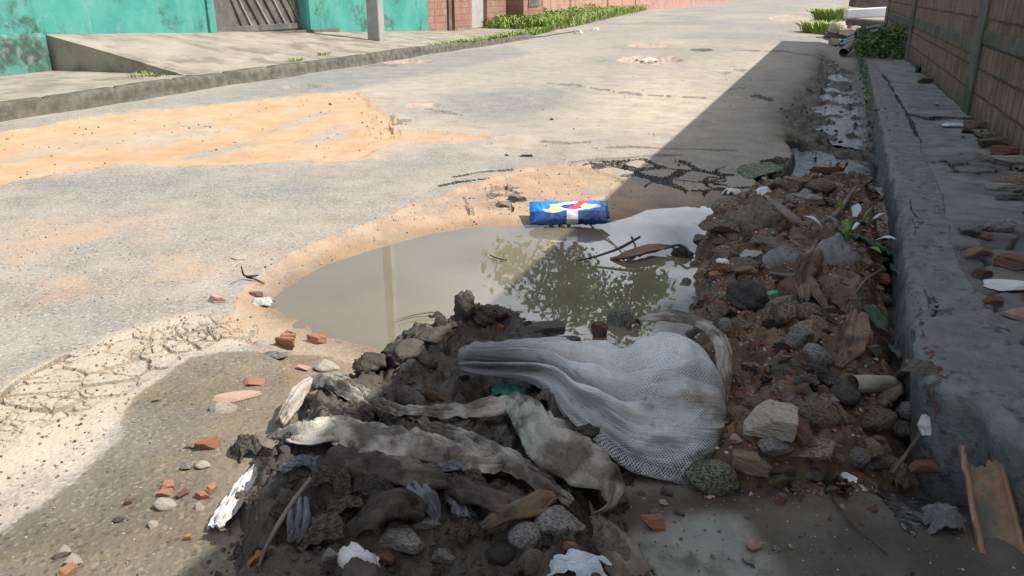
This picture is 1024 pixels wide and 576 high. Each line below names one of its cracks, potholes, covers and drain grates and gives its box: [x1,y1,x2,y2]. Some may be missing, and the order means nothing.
pothole [224,167,735,472]
crack [538,140,763,197]
crack [437,168,522,216]
crack [0,314,260,443]
crack [546,82,706,99]
